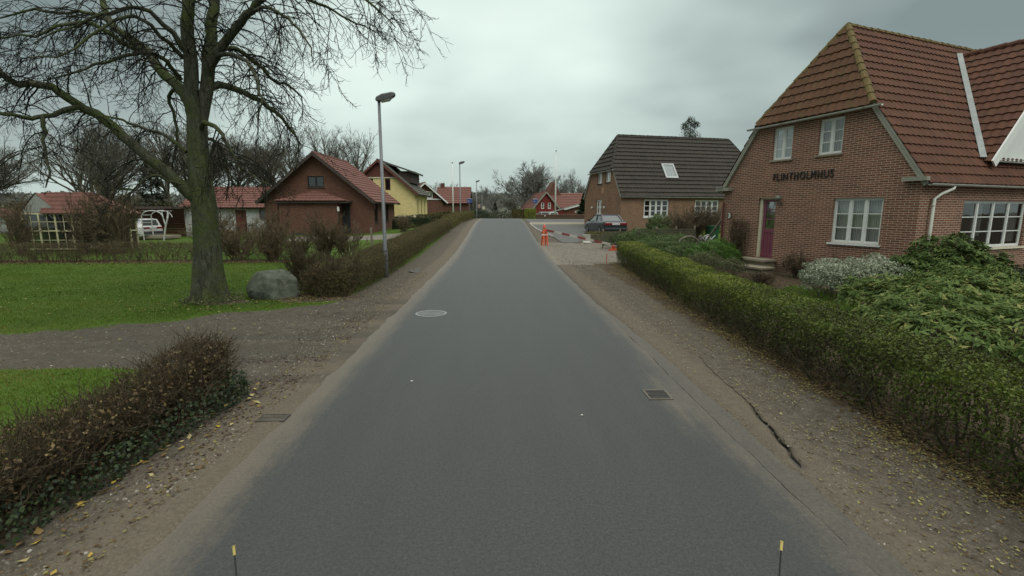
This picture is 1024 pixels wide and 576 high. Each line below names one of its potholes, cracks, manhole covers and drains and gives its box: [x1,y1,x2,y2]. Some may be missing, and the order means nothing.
drain grate [255,414,291,422]
crack [628,335,880,576]
drain grate [642,389,673,400]
